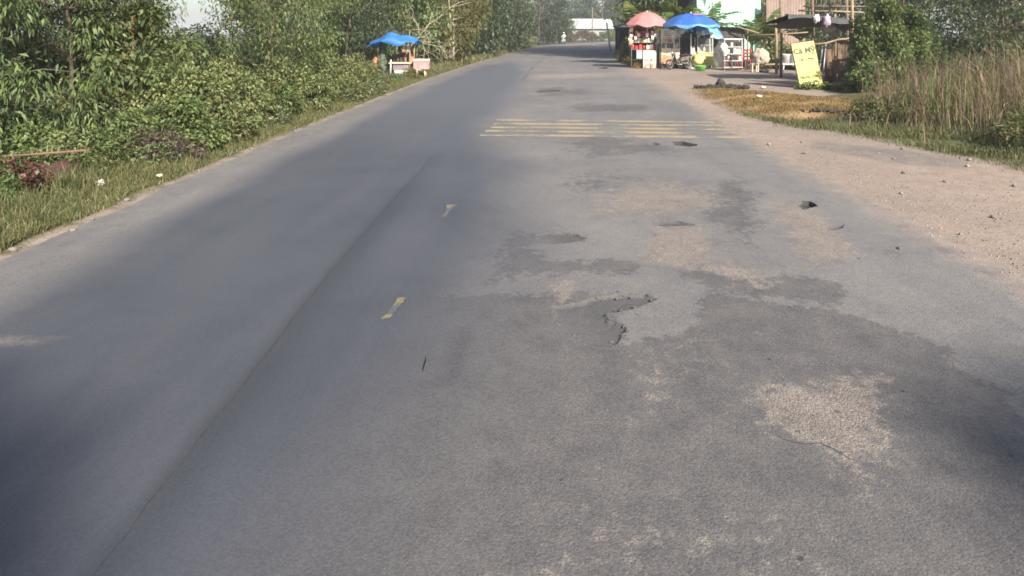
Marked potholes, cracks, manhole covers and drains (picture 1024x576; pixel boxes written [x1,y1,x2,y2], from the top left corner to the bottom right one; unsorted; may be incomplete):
crack [771,433,860,462]
pothole [799,201,818,209]
pothole [550,291,659,348]
